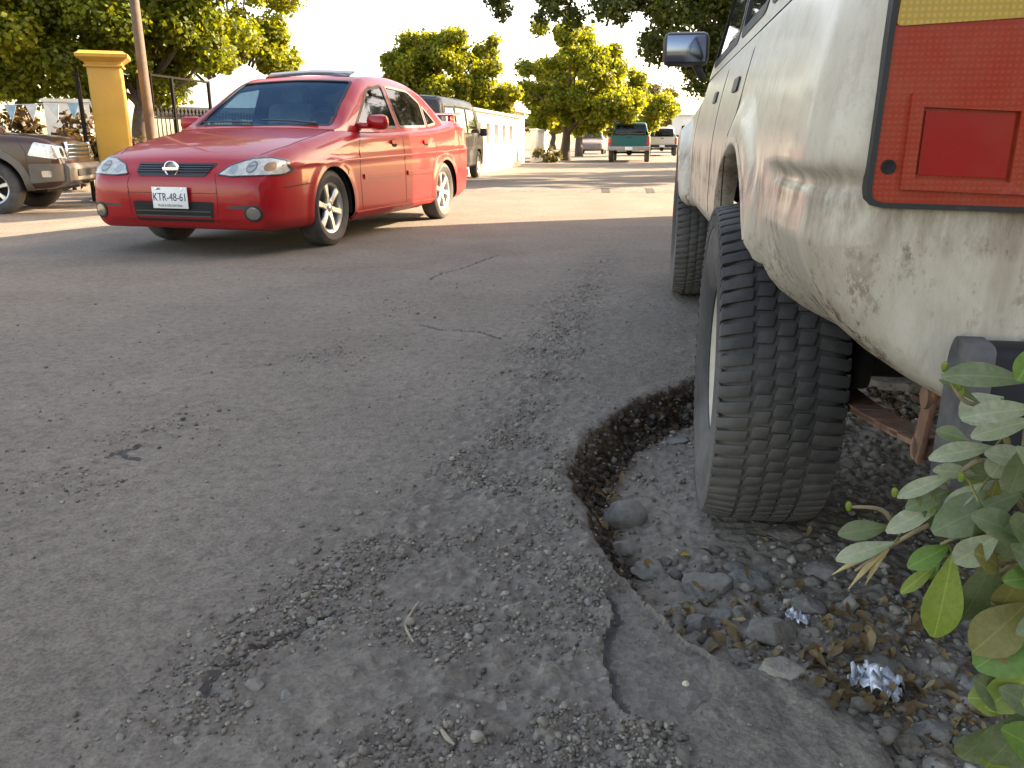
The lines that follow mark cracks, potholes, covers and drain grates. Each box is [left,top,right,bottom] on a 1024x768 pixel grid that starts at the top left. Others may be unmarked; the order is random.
pothole [565,379,1007,768]
crack [601,587,685,723]
crack [422,325,502,339]
crack [429,256,496,280]
